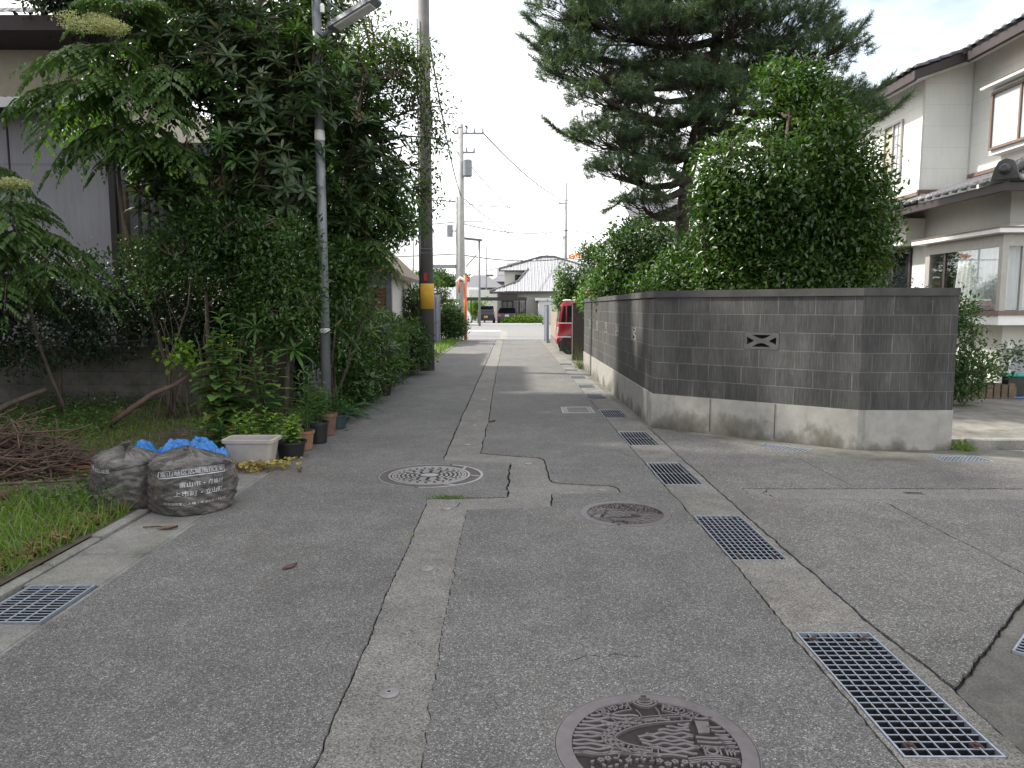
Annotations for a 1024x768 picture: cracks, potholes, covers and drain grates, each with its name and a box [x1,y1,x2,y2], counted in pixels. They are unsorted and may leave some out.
crack [953,599,1024,691]
drain grate [0,585,95,625]
drain grate [759,443,812,452]
drain grate [618,431,660,446]
manhole cover [554,693,762,768]
manhole cover [378,464,483,488]
drain grate [693,515,788,560]
drain grate [598,409,629,418]
manhole cover [579,501,672,527]
drain grate [1012,634,1024,656]
drain grate [646,462,704,485]
drain grate [795,632,1007,758]
